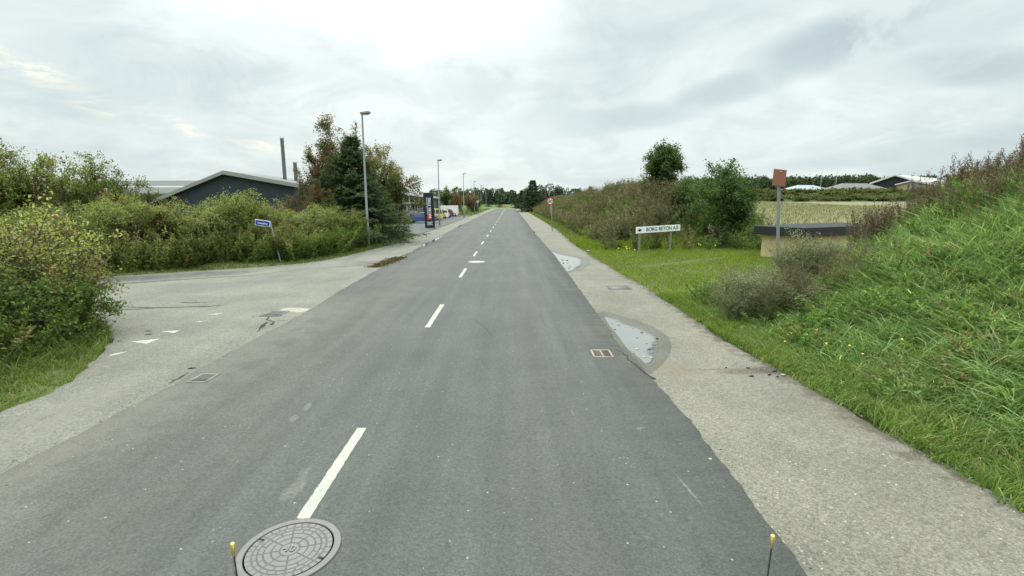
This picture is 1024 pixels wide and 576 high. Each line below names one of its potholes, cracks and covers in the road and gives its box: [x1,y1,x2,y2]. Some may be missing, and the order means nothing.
drain grate [186,373,220,383]
drain grate [590,349,614,358]
manhole cover [234,518,342,576]
